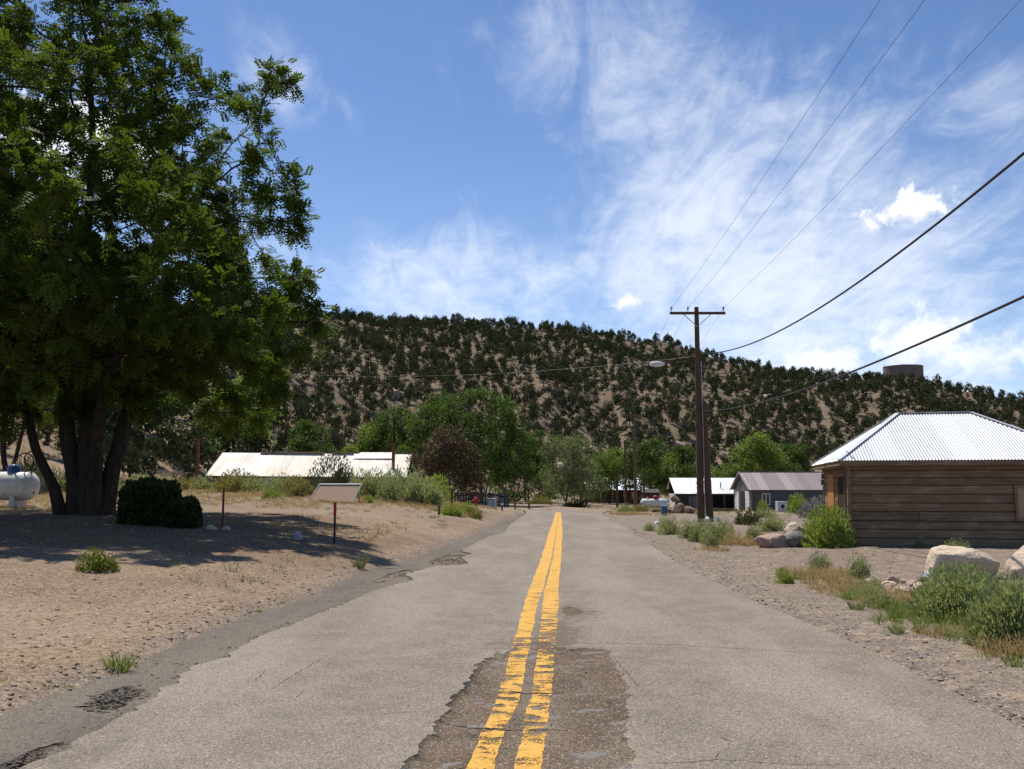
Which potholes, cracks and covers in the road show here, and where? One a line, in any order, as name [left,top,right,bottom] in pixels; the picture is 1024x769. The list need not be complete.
pothole [0,741,65,769]
pothole [429,555,465,565]
pothole [563,606,586,616]
pothole [80,686,145,713]
pothole [372,569,420,583]
